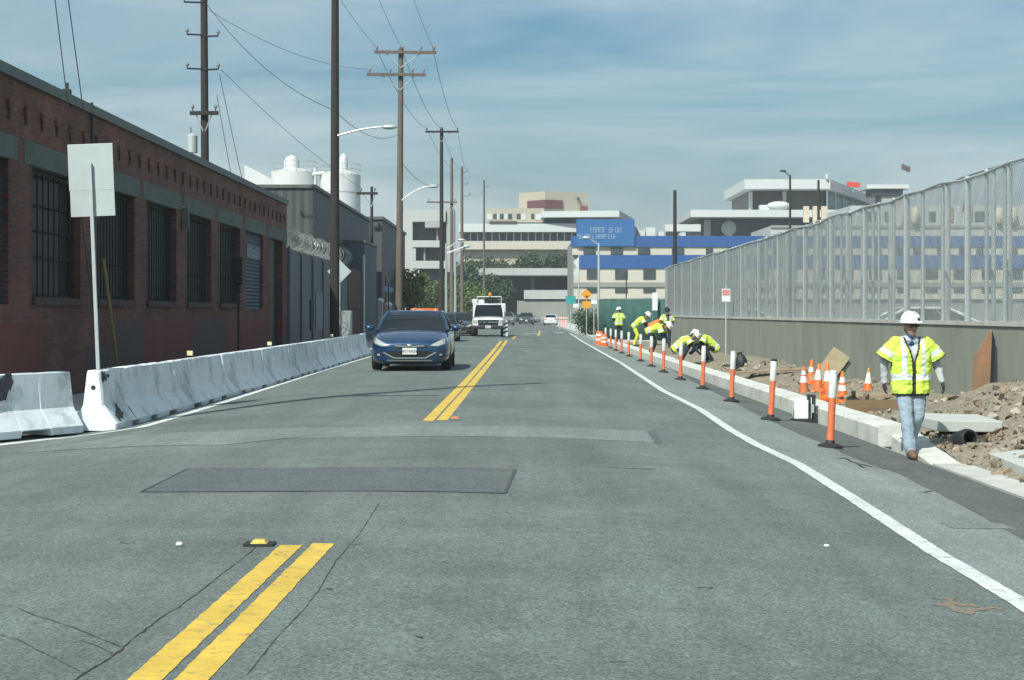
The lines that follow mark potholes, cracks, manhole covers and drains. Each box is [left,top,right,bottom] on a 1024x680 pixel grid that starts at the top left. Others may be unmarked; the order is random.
crack [247,504,379,674]
crack [1,547,256,680]
